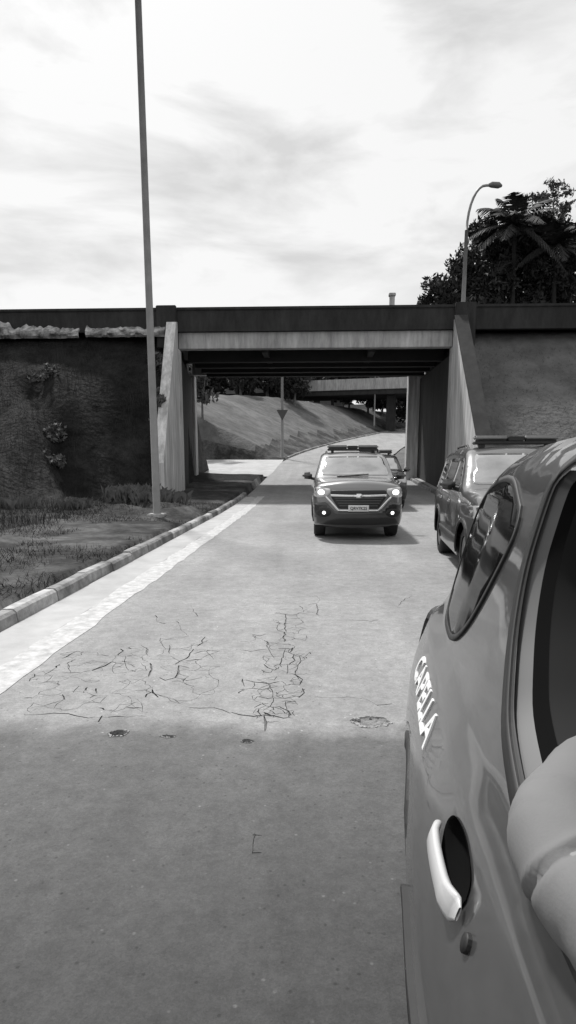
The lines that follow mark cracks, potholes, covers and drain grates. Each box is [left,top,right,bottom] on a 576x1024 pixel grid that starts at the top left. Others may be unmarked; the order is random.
crack [27,596,410,731]
pothole [350,716,393,728]
